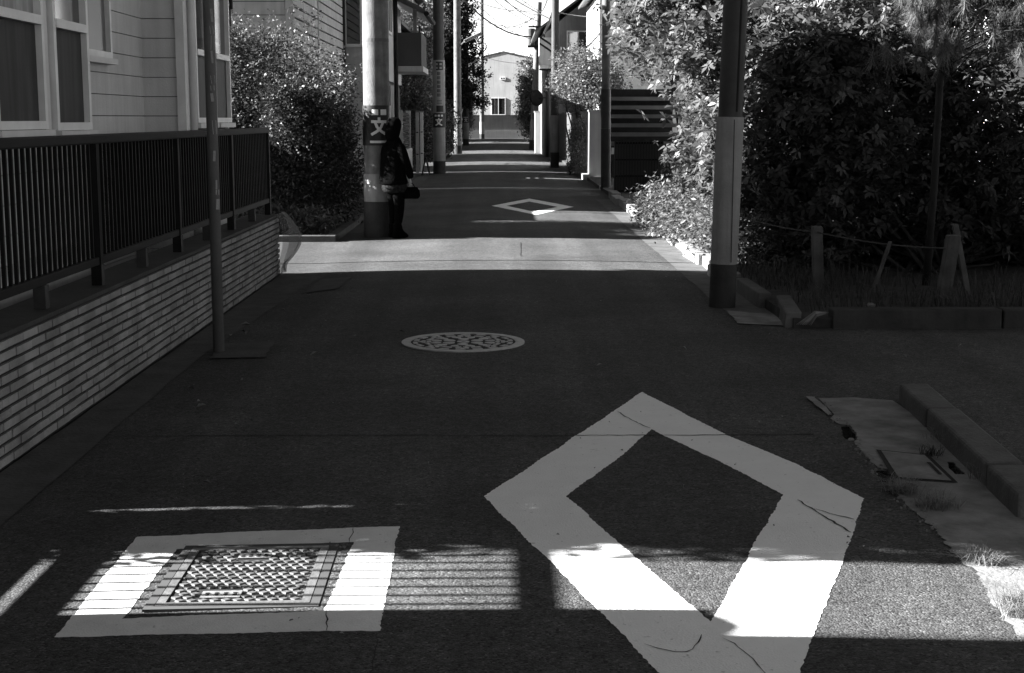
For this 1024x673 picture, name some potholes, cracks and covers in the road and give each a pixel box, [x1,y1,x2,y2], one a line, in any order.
manhole cover [402,332,525,352]
pothole [841,426,856,440]
crack [797,499,853,532]
